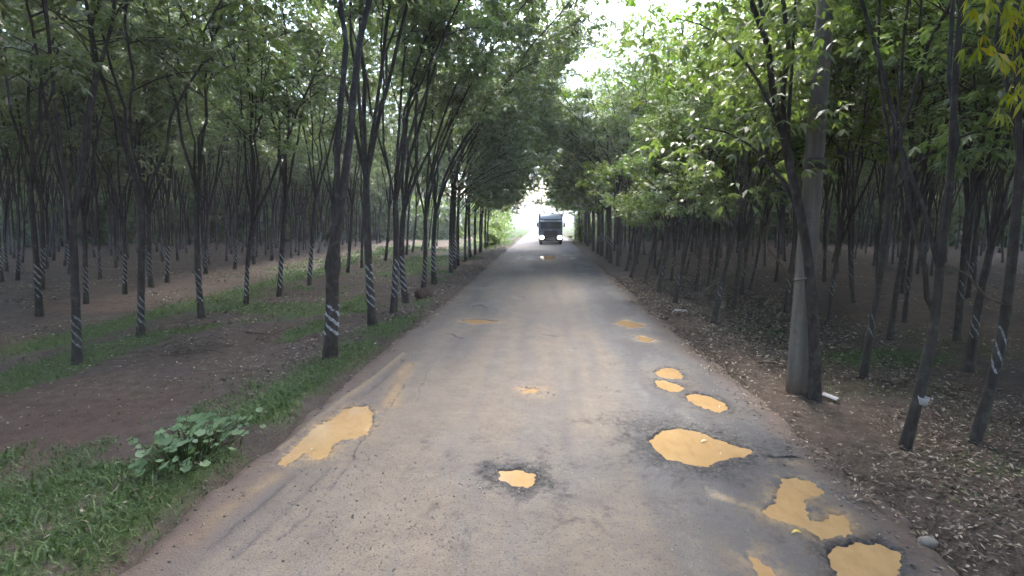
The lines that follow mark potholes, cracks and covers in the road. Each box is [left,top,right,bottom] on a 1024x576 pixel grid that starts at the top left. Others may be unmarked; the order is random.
pothole [612,319,647,329]
pothole [810,534,923,576]
pothole [631,335,658,343]
pothole [266,402,382,470]
pothole [482,461,554,497]
pothole [749,471,867,546]
pothole [628,420,778,478]
pothole [648,365,690,381]
pothole [649,378,693,394]
pothole [517,386,545,394]
pothole [736,548,787,576]
pothole [676,389,740,416]
